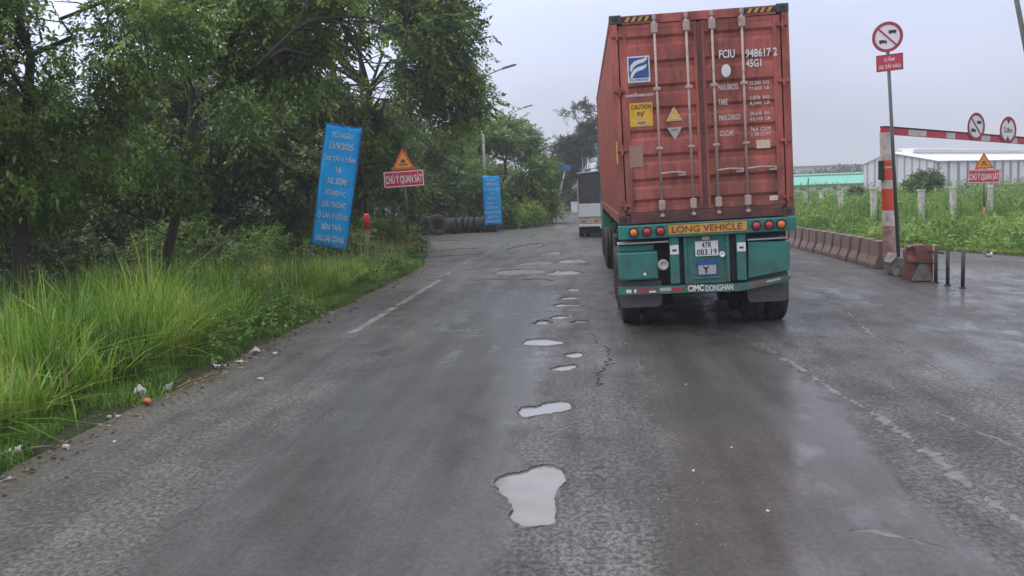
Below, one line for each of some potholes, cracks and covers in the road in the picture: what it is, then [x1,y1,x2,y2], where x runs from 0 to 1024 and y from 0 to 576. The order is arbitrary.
crack [849,528,942,547]
pothole [548,363,579,372]
pothole [489,463,570,529]
pothole [519,338,568,346]
pothole [502,243,547,251]
pothole [515,399,573,418]
